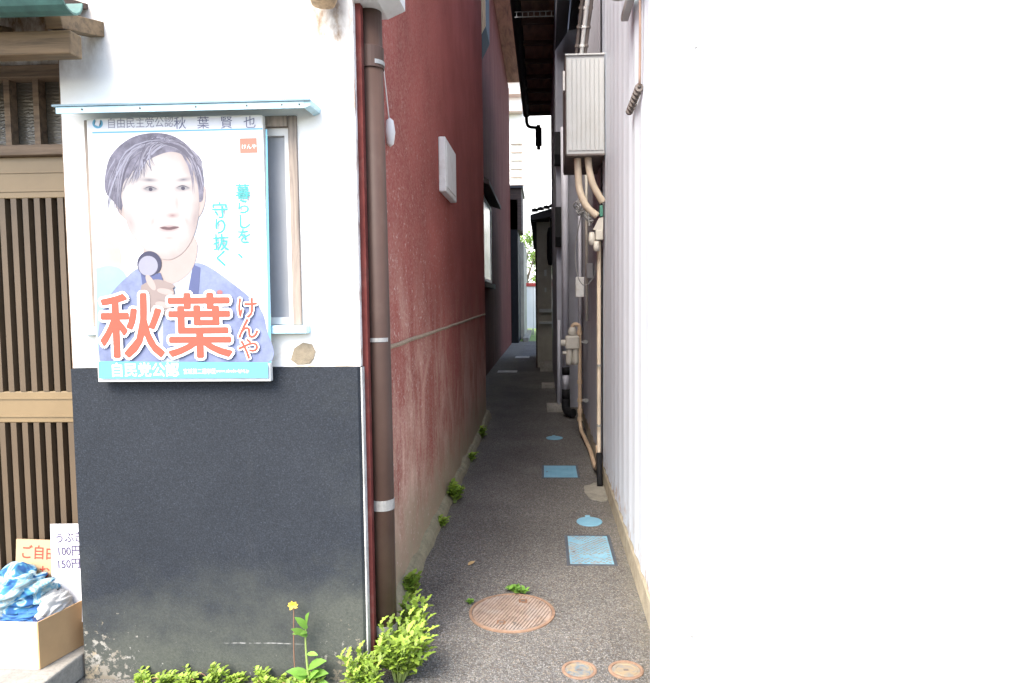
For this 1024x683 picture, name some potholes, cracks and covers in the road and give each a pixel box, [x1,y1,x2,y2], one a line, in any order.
utility cover [562,660,597,680]
utility cover [577,515,602,527]
manhole cover [469,593,555,633]
utility cover [608,660,644,680]
